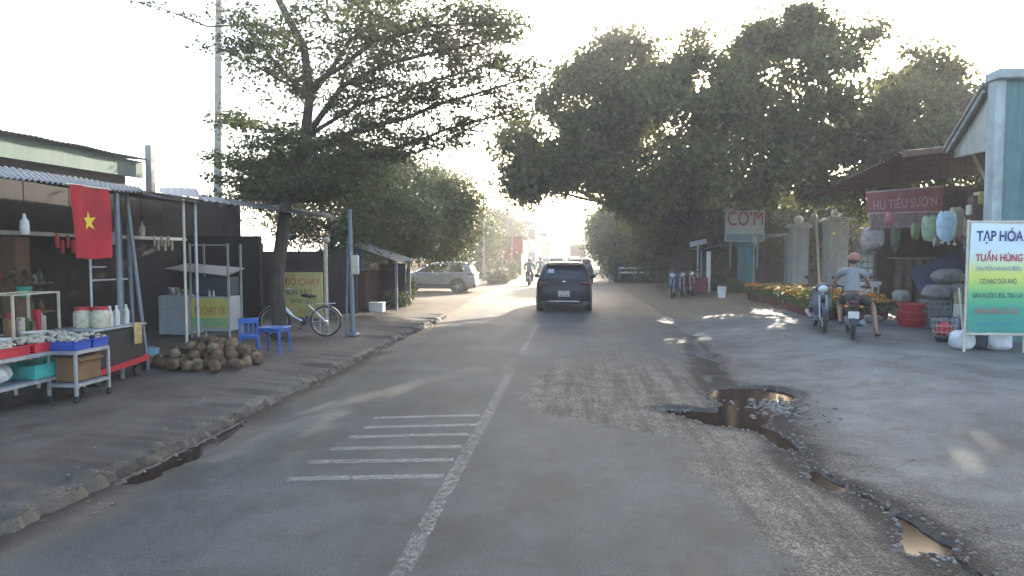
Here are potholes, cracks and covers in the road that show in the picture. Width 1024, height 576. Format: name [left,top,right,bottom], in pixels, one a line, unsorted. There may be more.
pothole [113,419,250,485]
pothole [888,508,962,558]
pothole [656,386,802,452]
pothole [805,470,849,493]
